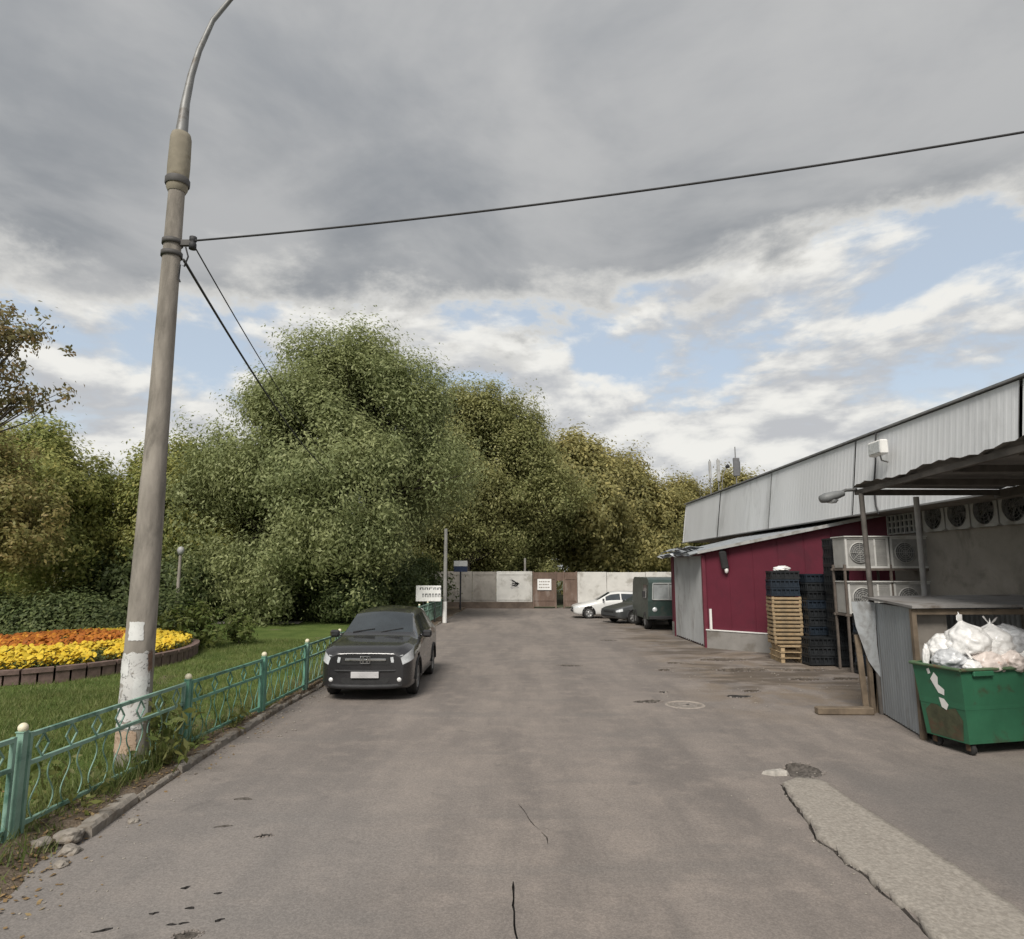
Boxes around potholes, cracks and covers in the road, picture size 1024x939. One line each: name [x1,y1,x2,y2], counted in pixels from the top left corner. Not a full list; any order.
pothole [782,762,827,778]
manhole cover [665,701,705,709]
